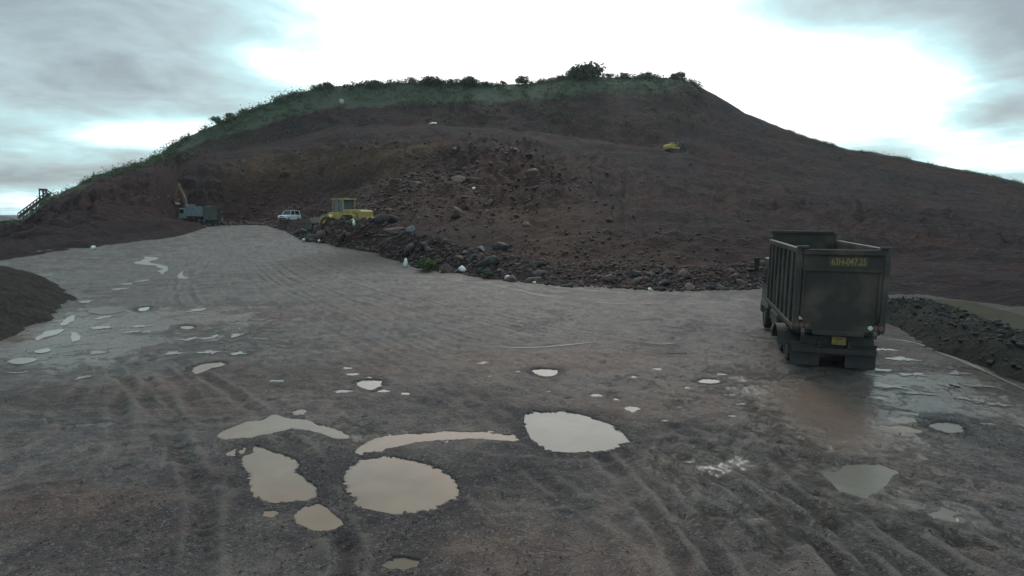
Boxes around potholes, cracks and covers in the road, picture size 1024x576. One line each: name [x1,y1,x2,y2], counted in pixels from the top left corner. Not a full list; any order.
pothole [184,360,232,375]
pothole [526,367,564,378]
pothole [330,451,472,521]
pothole [514,407,642,459]
pothole [229,443,325,511]
pothole [917,418,975,437]
